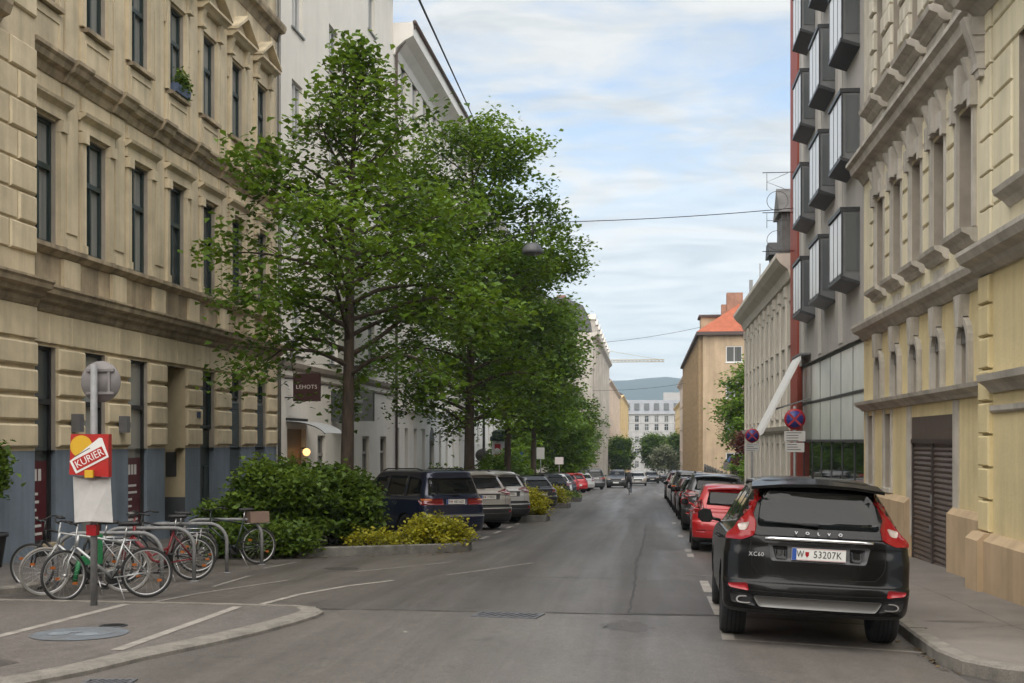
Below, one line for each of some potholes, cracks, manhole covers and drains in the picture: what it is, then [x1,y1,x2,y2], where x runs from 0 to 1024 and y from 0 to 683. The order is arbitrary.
drain grate [471,611,545,619]
crack [506,526,670,612]
